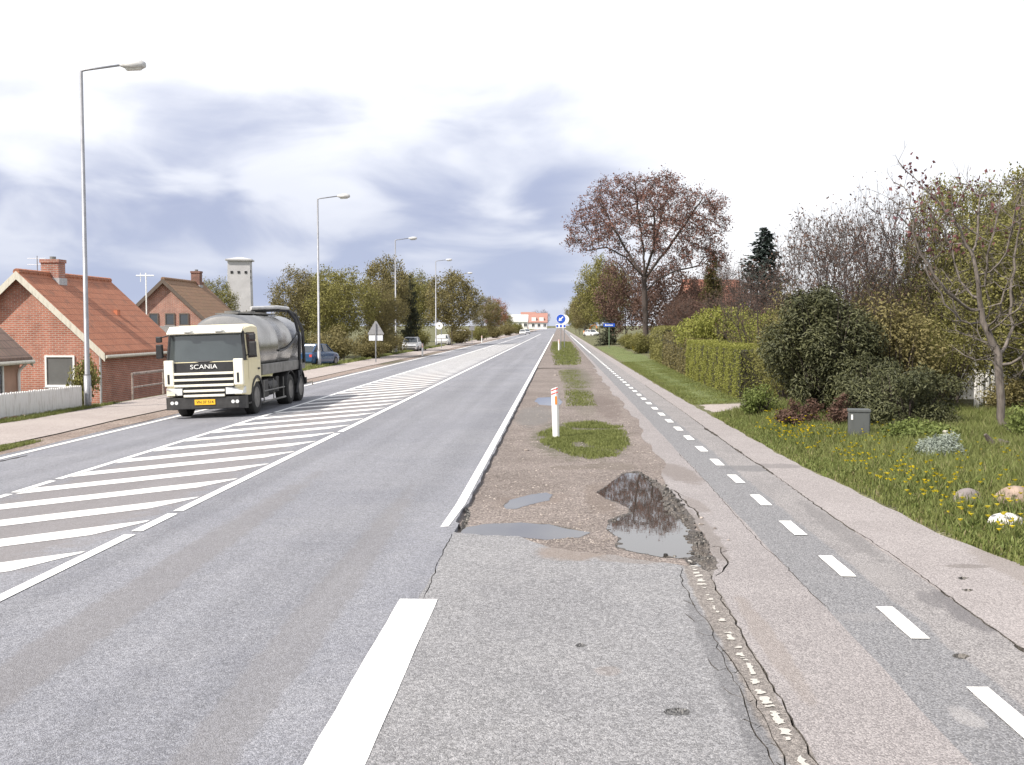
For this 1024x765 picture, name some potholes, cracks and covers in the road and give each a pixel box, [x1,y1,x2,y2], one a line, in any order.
pothole [503,492,553,509]
pothole [460,522,590,540]
crack [673,455,830,765]
pothole [535,397,562,406]
pothole [664,708,690,716]
pothole [596,471,719,572]
